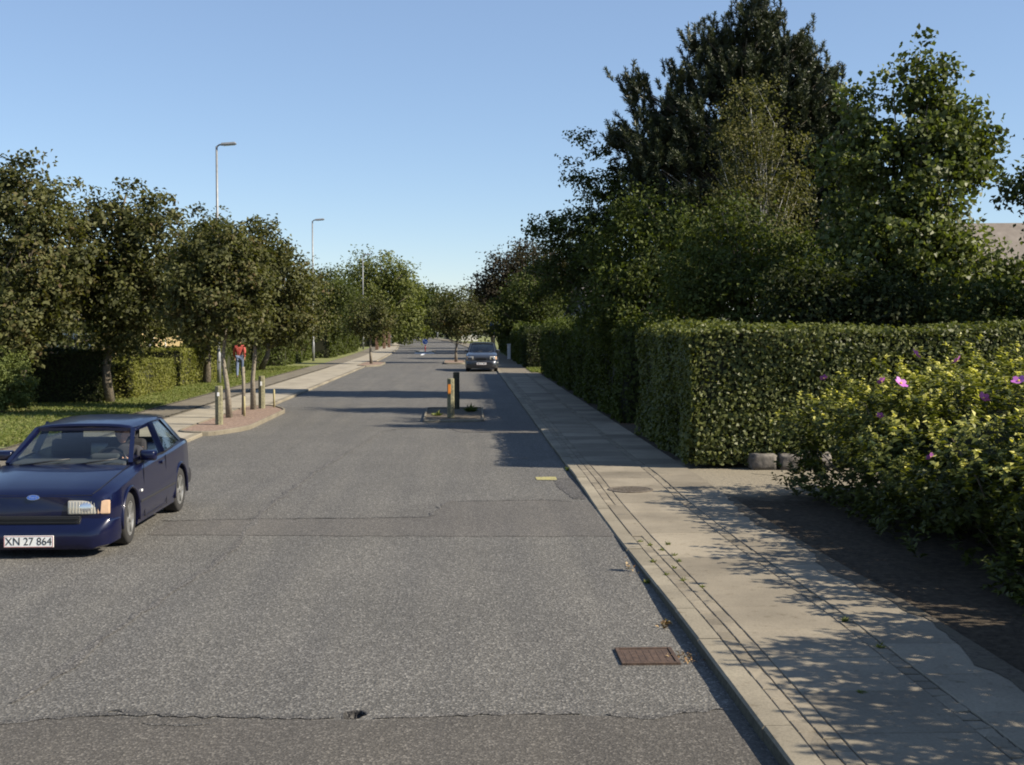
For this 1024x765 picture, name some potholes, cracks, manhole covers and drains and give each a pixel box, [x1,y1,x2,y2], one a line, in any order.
pothole [342,710,367,719]
